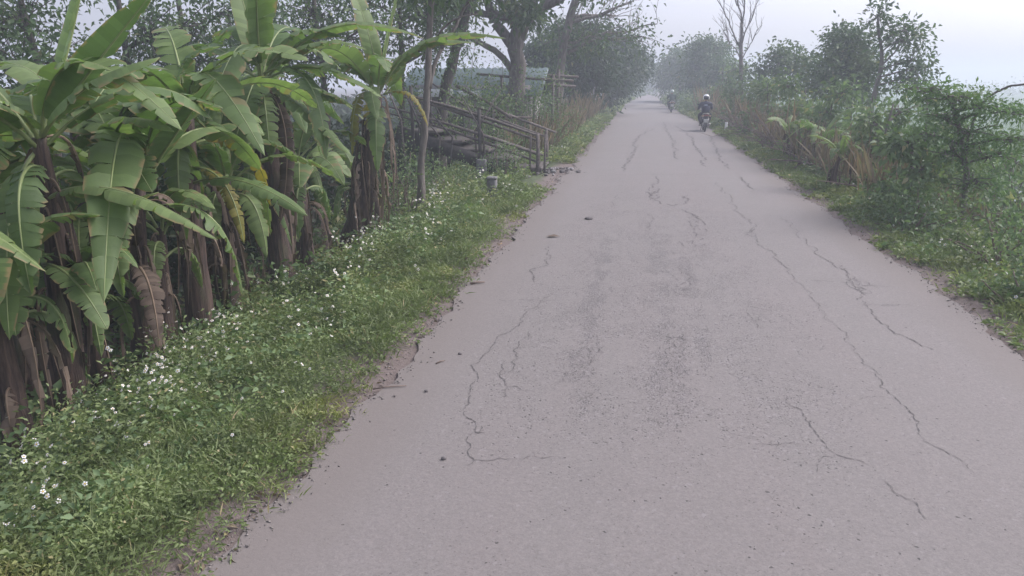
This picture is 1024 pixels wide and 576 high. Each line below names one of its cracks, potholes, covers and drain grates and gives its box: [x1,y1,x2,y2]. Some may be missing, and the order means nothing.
crack [786,395,927,520]
crack [463,296,549,464]
crack [621,122,975,474]
